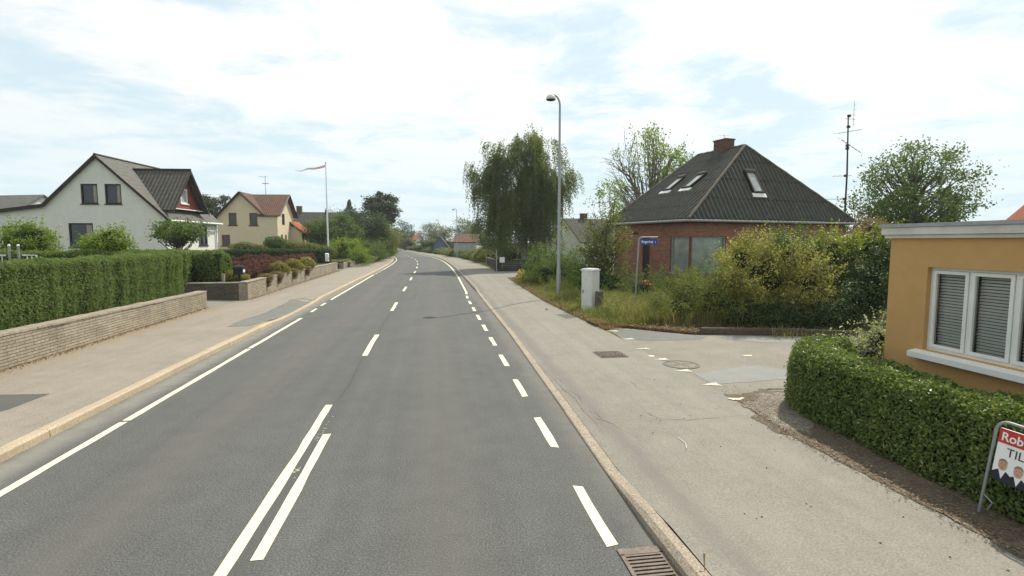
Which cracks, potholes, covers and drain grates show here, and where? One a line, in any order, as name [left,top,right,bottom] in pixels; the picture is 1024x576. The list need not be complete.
manhole cover [663,360,700,369]
drain grate [617,545,681,576]
